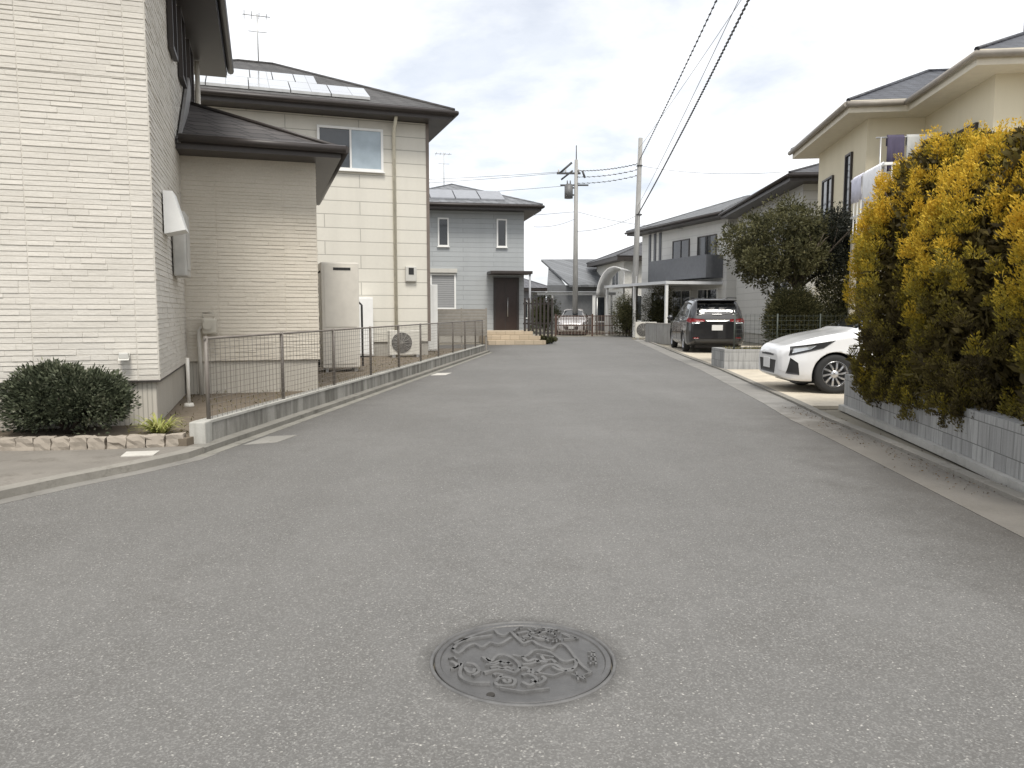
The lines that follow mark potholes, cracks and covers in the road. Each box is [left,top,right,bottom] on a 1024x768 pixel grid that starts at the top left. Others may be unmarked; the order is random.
manhole cover [429,621,617,707]
